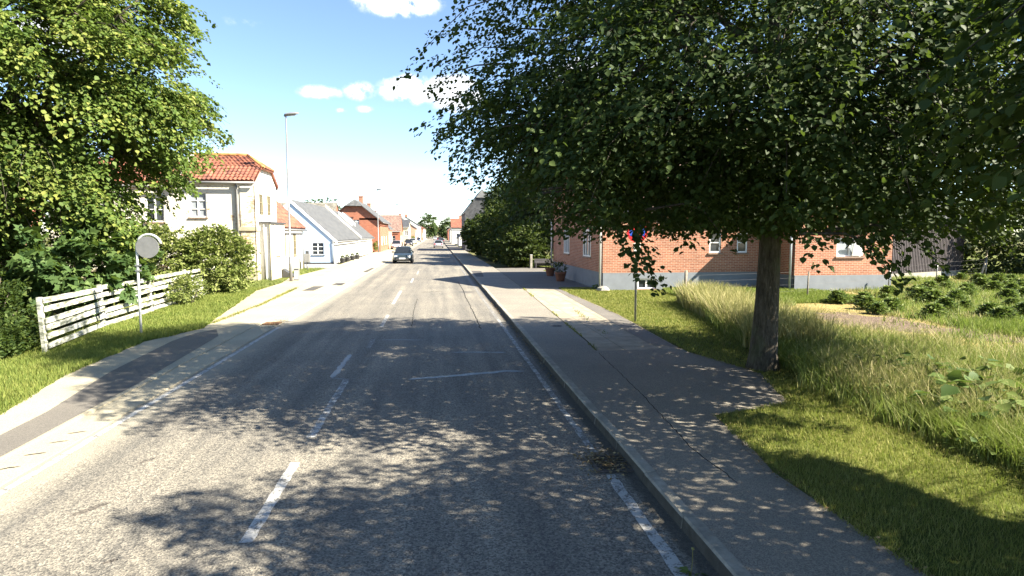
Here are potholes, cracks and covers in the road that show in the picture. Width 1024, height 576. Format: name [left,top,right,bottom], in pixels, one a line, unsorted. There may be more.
drain grate [586,454,634,474]
